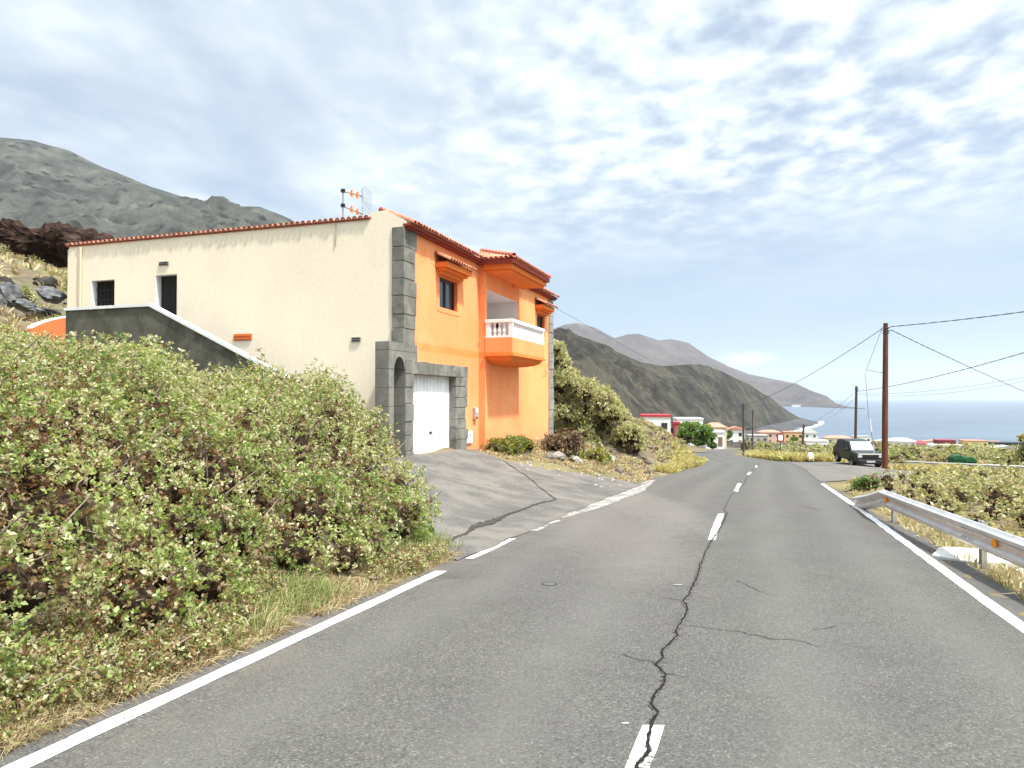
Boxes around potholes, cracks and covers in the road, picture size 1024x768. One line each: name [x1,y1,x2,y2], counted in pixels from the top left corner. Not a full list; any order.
crack [609,464,834,768]
